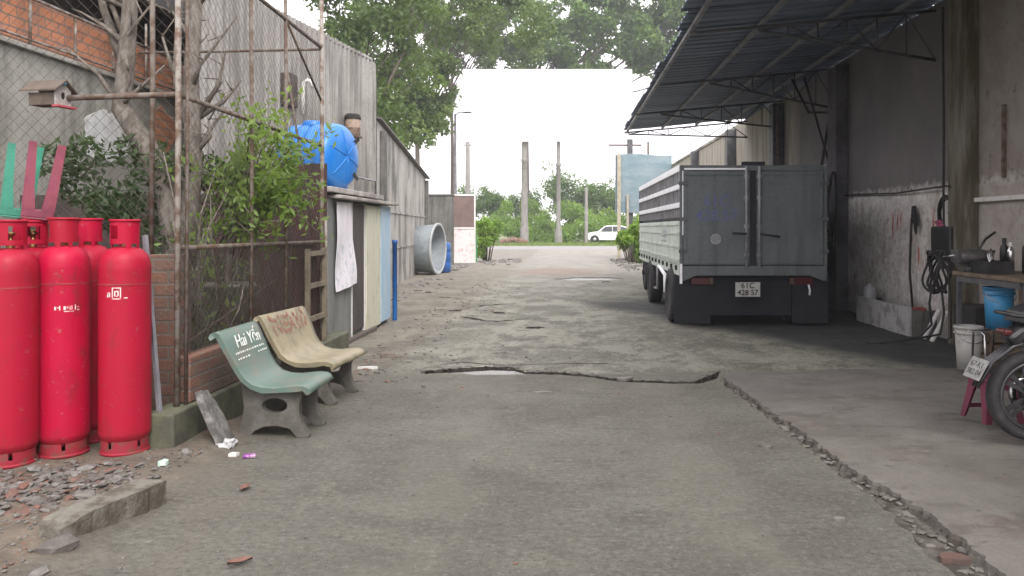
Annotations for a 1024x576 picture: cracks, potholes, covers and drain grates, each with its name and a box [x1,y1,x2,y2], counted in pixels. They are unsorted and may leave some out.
crack [724,380,999,576]
